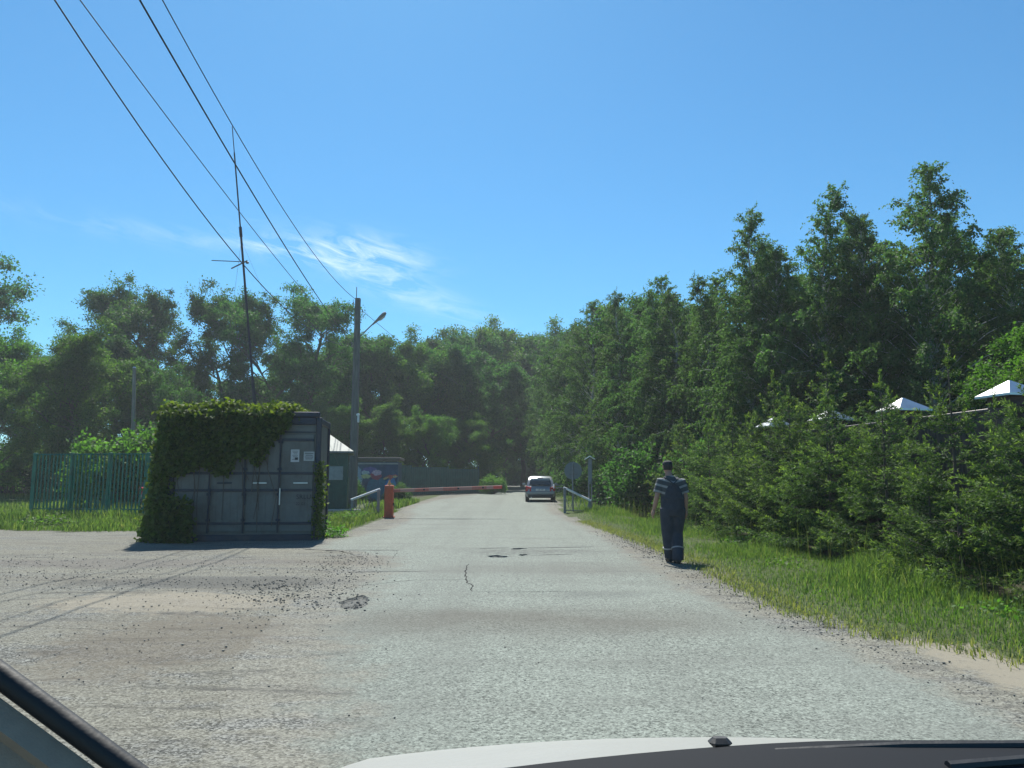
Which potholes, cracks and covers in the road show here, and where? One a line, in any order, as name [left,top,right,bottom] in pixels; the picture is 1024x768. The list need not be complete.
pothole [339,595,369,610]
crack [352,547,573,592]
